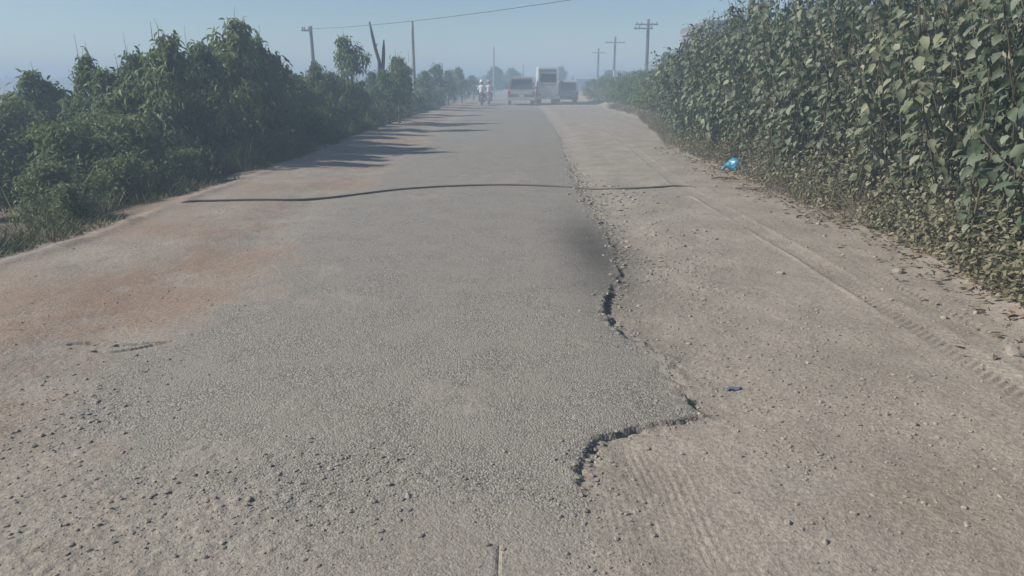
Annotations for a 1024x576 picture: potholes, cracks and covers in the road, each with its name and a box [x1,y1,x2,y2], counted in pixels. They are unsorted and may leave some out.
crack [71,340,176,354]
